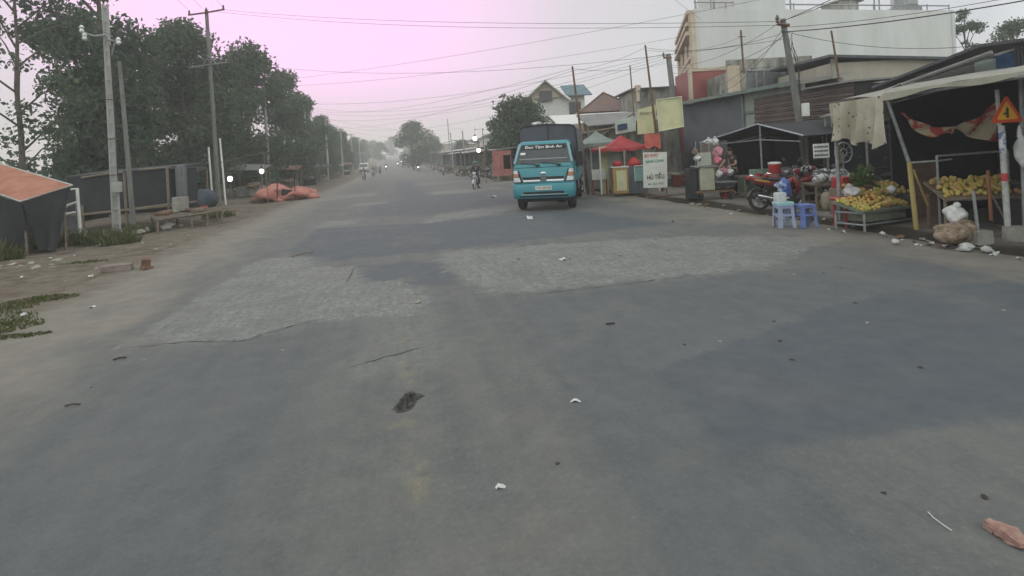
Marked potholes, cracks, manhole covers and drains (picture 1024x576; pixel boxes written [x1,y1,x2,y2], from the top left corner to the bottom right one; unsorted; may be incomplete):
pothole [392,391,425,413]
crack [121,318,327,348]
